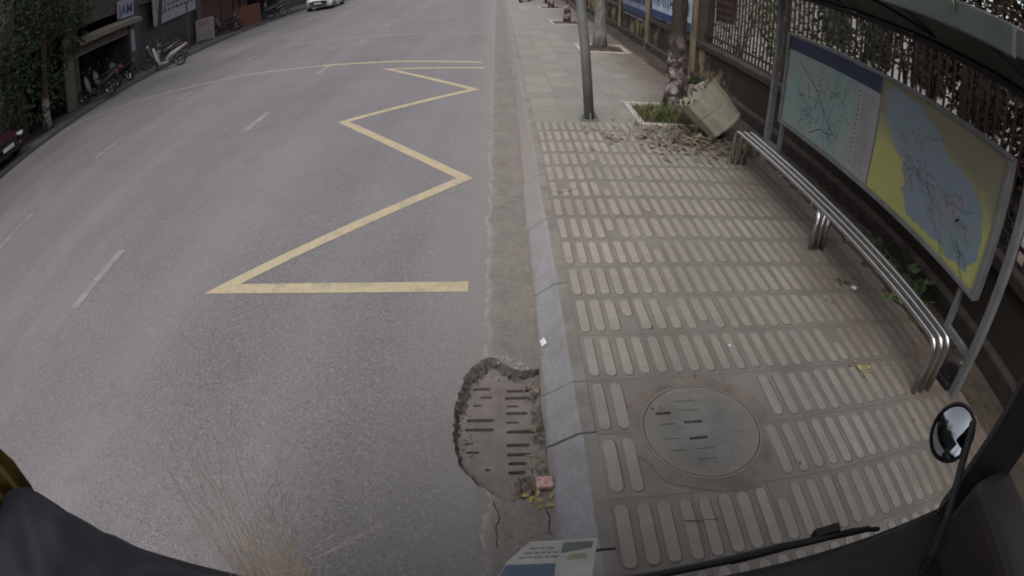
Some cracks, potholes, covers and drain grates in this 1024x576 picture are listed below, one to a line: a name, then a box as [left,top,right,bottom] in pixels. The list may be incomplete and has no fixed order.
drain grate [457,368,549,509]
manhole cover [640,384,763,479]
